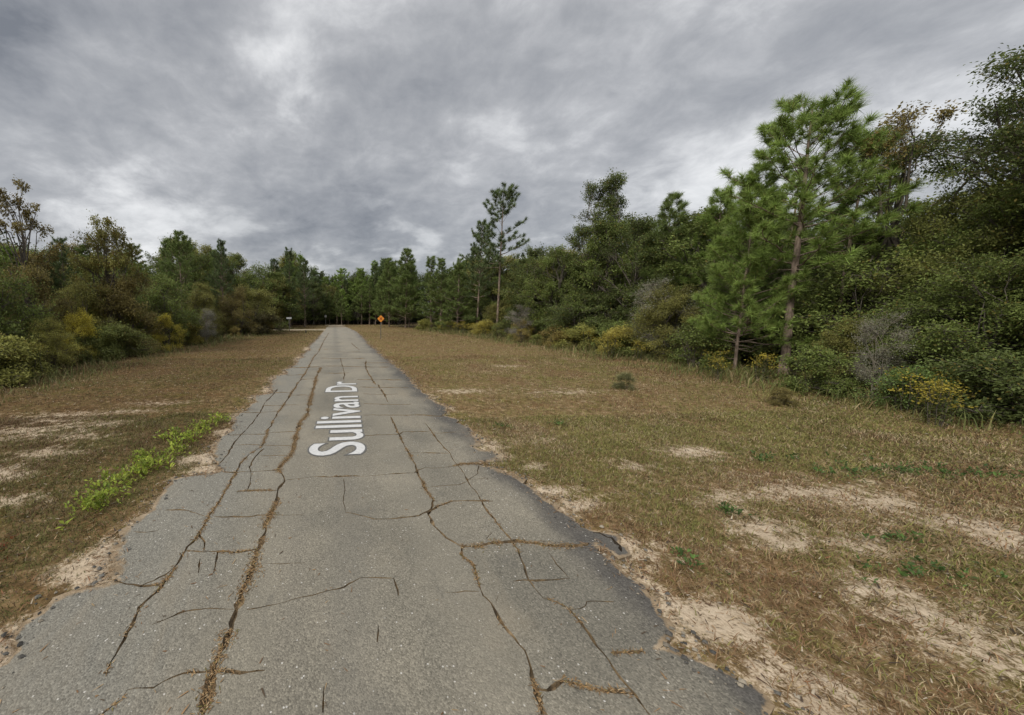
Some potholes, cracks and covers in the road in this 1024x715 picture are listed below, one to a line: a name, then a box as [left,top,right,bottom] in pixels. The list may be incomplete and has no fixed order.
crack [98,333,650,715]
